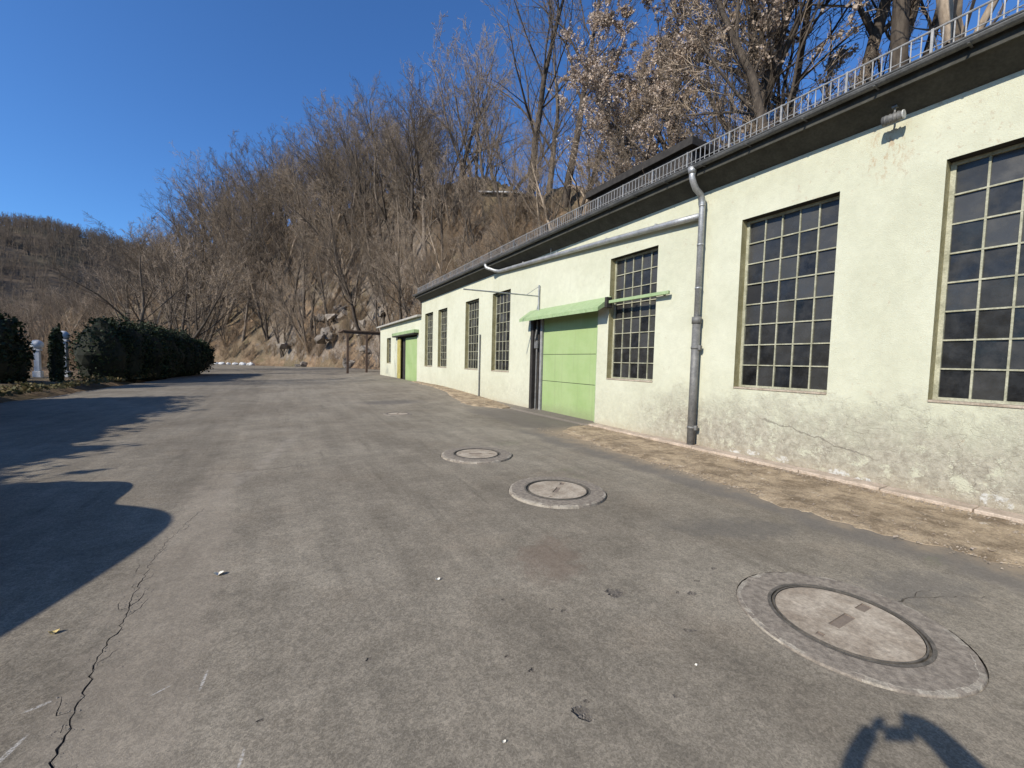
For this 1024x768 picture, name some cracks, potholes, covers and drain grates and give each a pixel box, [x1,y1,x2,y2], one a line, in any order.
manhole cover [441,447,513,464]
crack [48,508,205,768]
crack [897,589,997,602]
manhole cover [508,476,607,509]
manhole cover [736,572,989,699]
